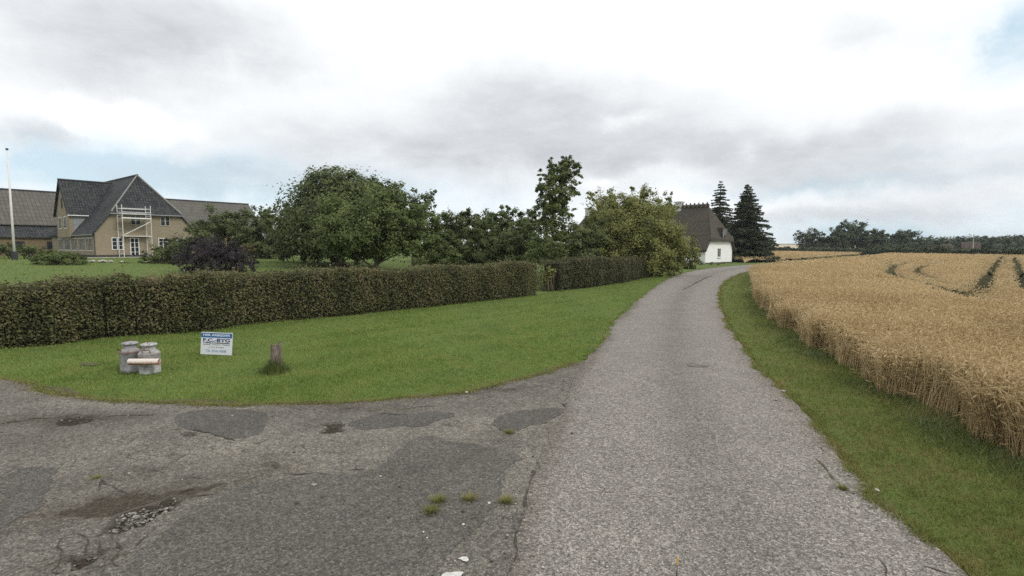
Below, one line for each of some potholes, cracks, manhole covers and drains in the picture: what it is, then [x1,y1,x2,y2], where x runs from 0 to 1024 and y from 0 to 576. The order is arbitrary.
pothole [319,422,345,434]
pothole [53,414,98,427]
pothole [101,494,185,535]
crack [49,522,146,575]
